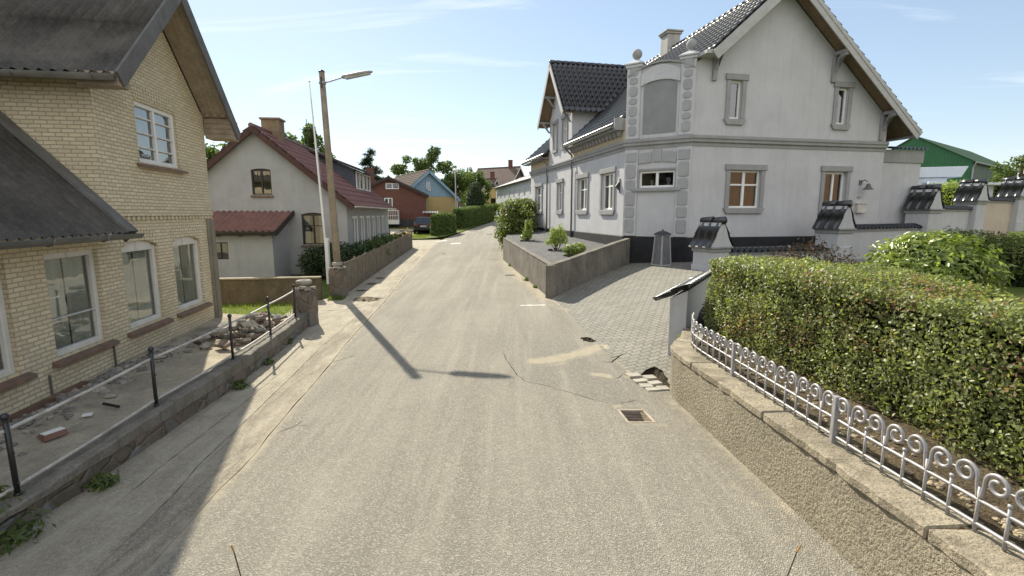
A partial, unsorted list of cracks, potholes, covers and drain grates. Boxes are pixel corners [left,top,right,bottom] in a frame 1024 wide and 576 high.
drain grate [617,409,656,423]
pothole [641,366,670,388]
